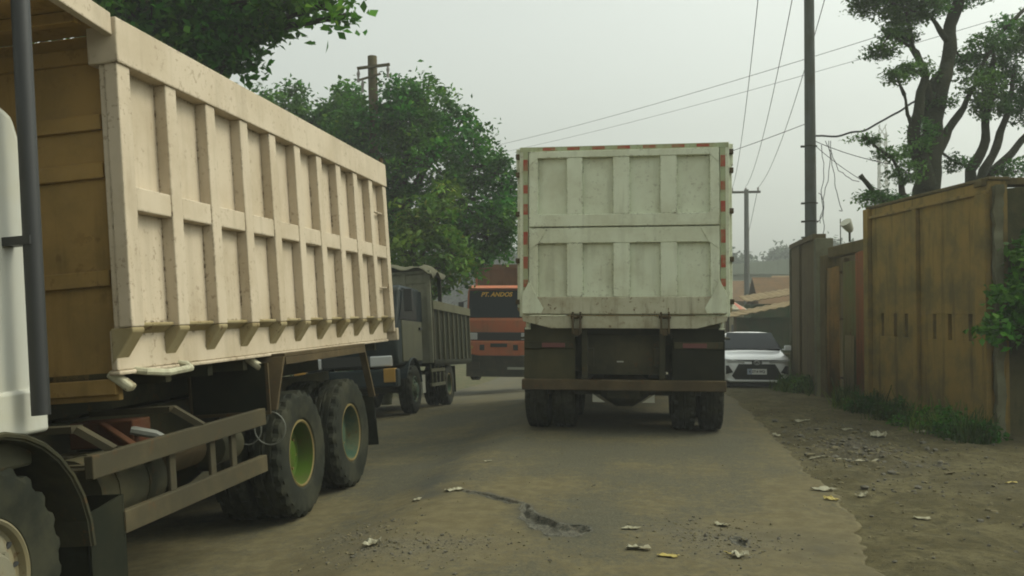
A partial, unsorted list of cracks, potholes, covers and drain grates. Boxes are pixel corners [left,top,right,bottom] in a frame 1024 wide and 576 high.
pothole [517,503,593,537]
crack [462,490,525,504]
